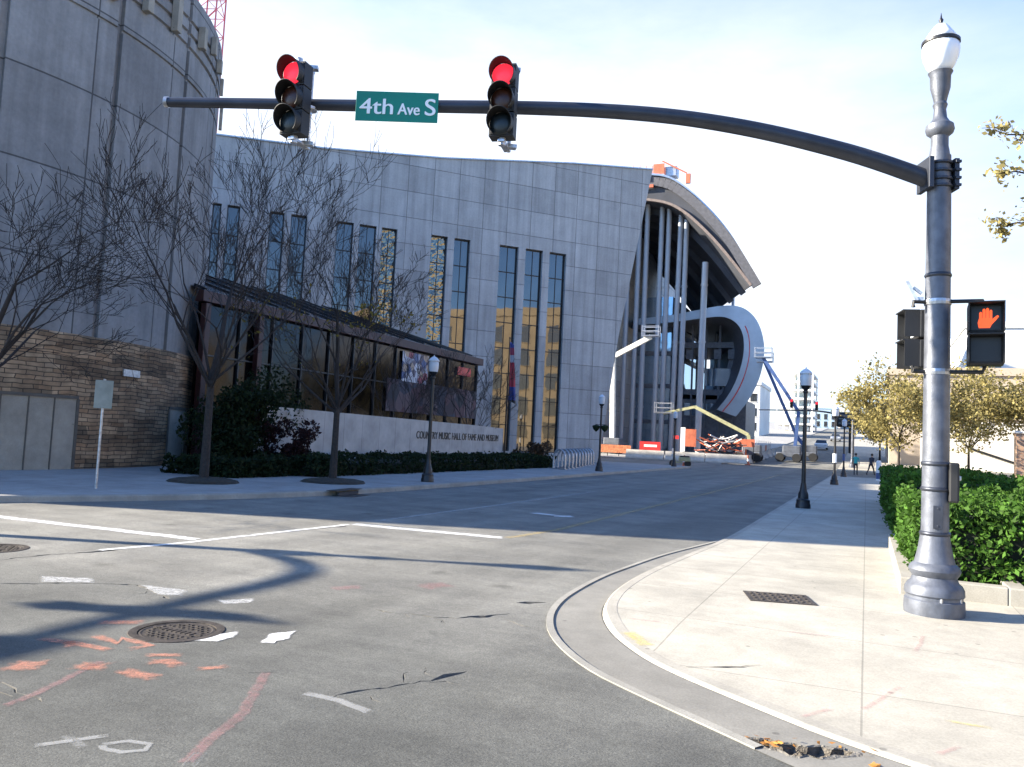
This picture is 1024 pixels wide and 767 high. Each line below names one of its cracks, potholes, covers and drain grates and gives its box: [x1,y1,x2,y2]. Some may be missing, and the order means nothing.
pothole [743,736,862,760]
manhole cover [127,620,226,643]
crack [330,667,465,702]
manhole cover [0,544,30,553]
crack [375,602,545,627]
